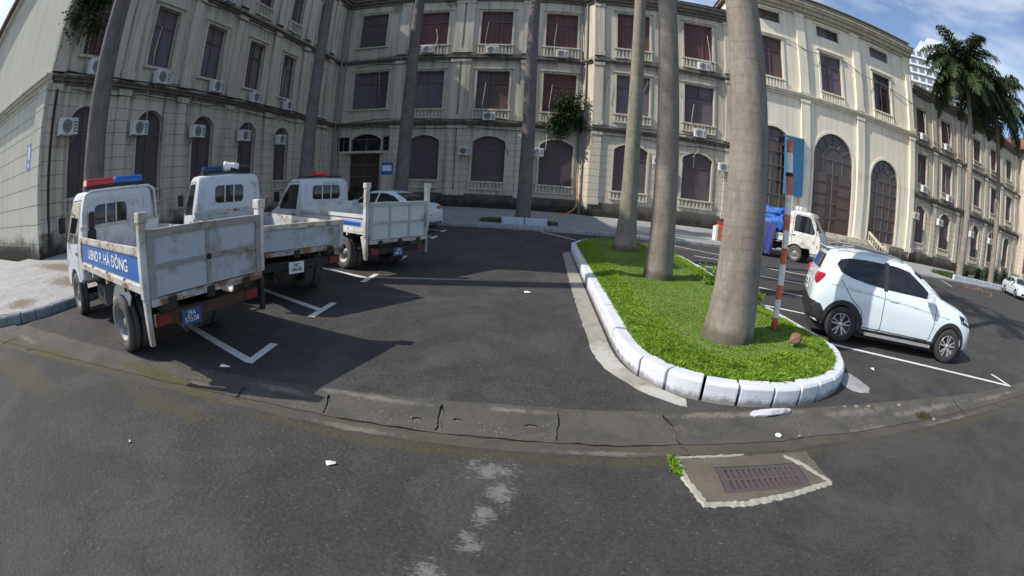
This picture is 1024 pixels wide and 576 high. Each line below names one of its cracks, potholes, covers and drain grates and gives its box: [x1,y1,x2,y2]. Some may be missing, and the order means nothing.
crack [322,394,544,443]
crack [571,415,686,451]
